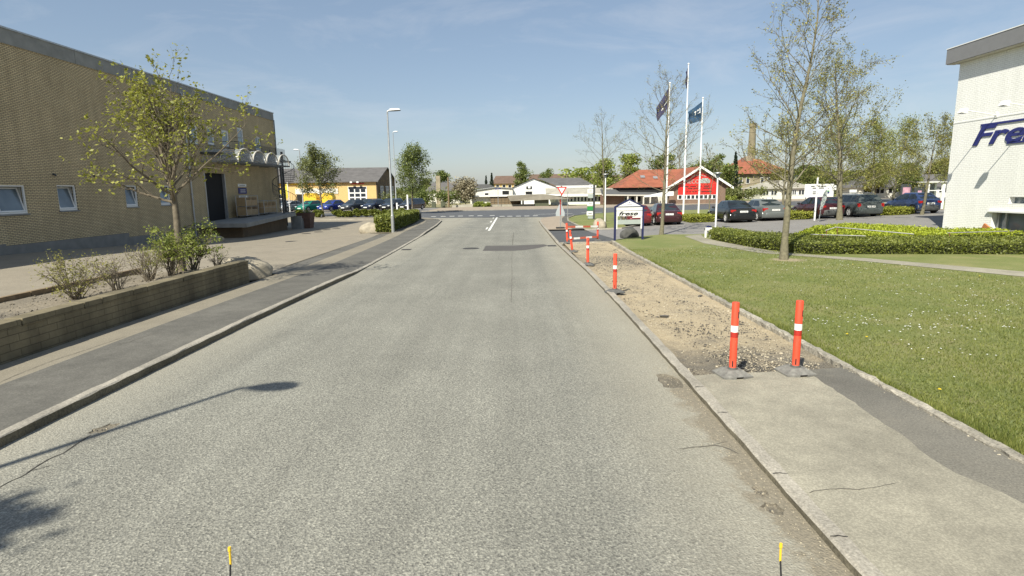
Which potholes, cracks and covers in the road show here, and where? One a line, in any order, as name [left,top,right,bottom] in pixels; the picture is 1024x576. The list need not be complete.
crack [0,437,87,487]
pothole [750,486,769,498]
pothole [760,501,785,515]
crack [681,441,739,454]
